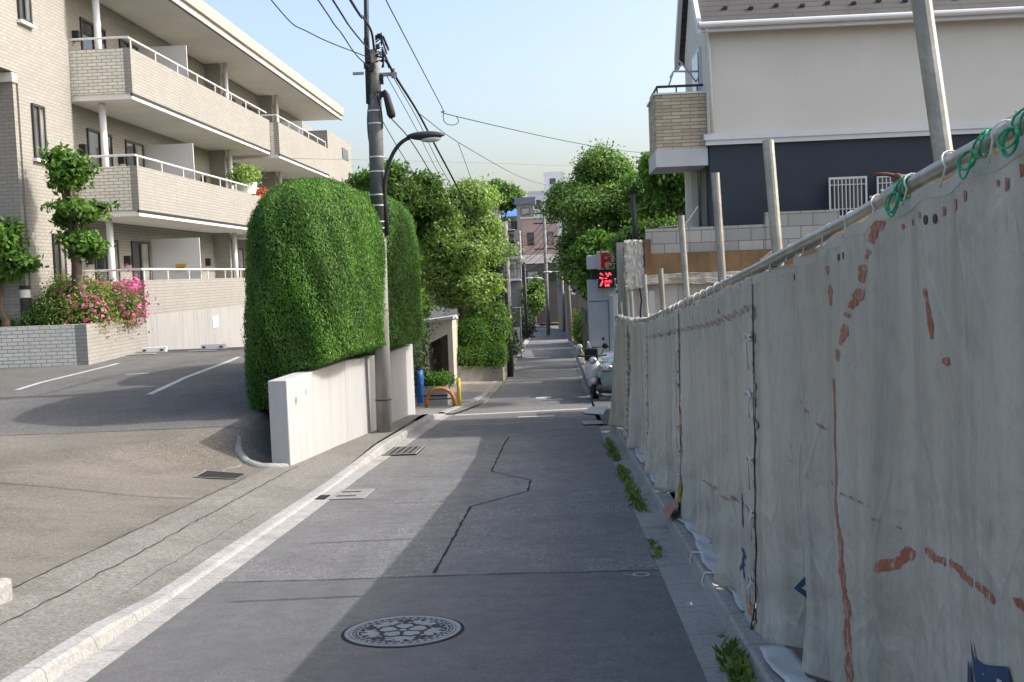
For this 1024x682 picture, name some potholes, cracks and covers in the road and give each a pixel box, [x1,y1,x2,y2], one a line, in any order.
drain grate [193,470,248,480]
manhole cover [341,615,465,648]
drain grate [382,446,425,456]
